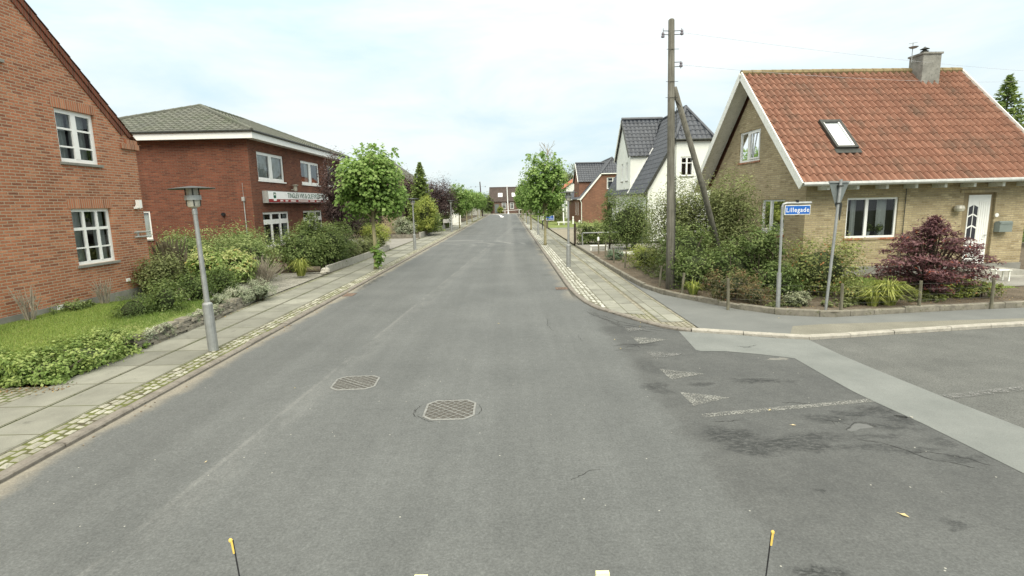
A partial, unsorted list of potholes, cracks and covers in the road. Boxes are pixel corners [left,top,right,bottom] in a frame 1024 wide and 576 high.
manhole cover [330,375,380,391]
pothole [846,422,878,431]
manhole cover [422,399,476,420]
crack [864,440,988,468]
